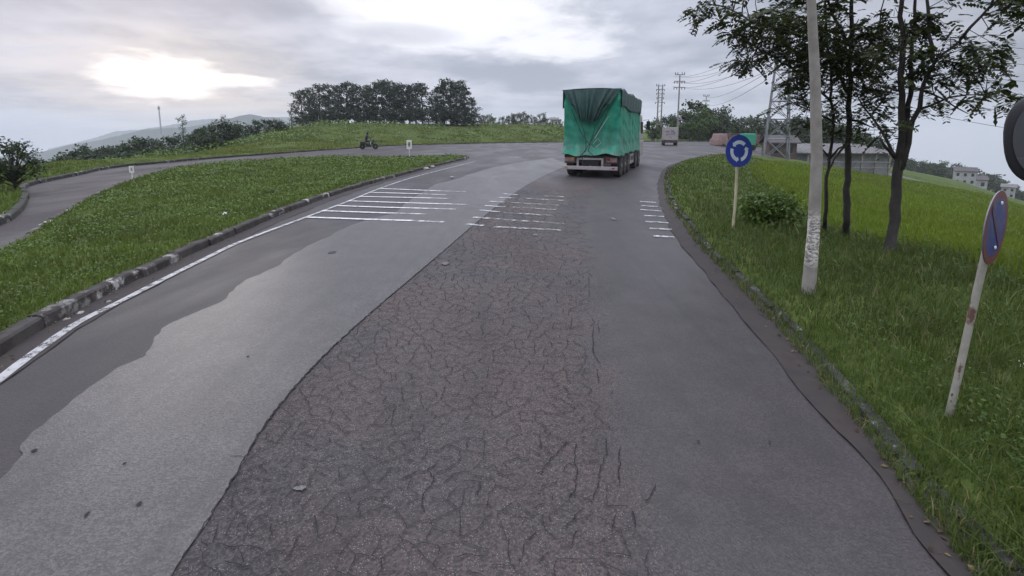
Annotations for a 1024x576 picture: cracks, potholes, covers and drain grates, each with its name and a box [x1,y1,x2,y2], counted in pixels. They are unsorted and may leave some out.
crack [181,189,656,576]
